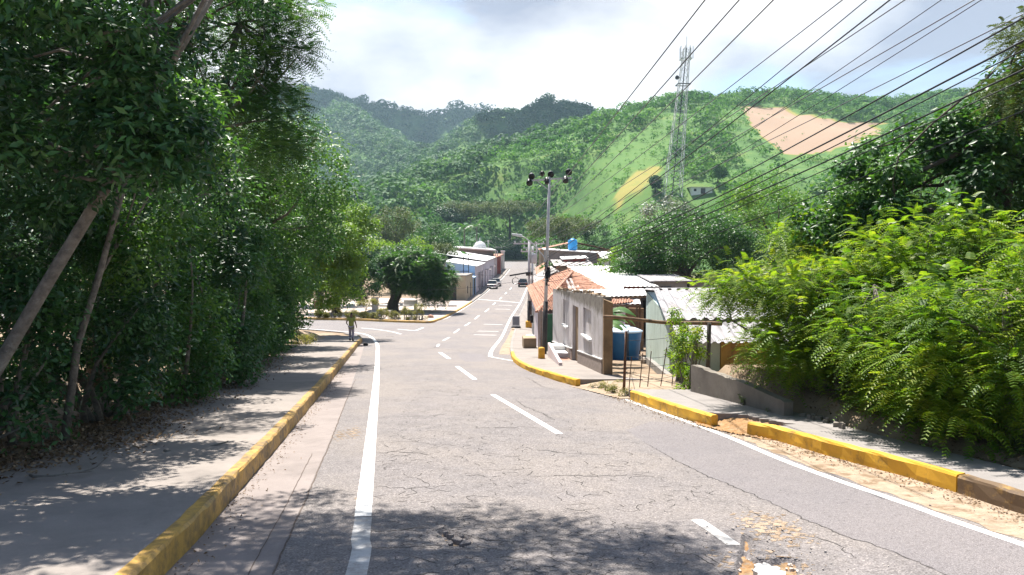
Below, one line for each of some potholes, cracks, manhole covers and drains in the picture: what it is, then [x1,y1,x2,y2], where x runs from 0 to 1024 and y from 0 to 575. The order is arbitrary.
pothole [722,534,804,575]
pothole [435,528,473,548]
crack [373,379,947,575]
